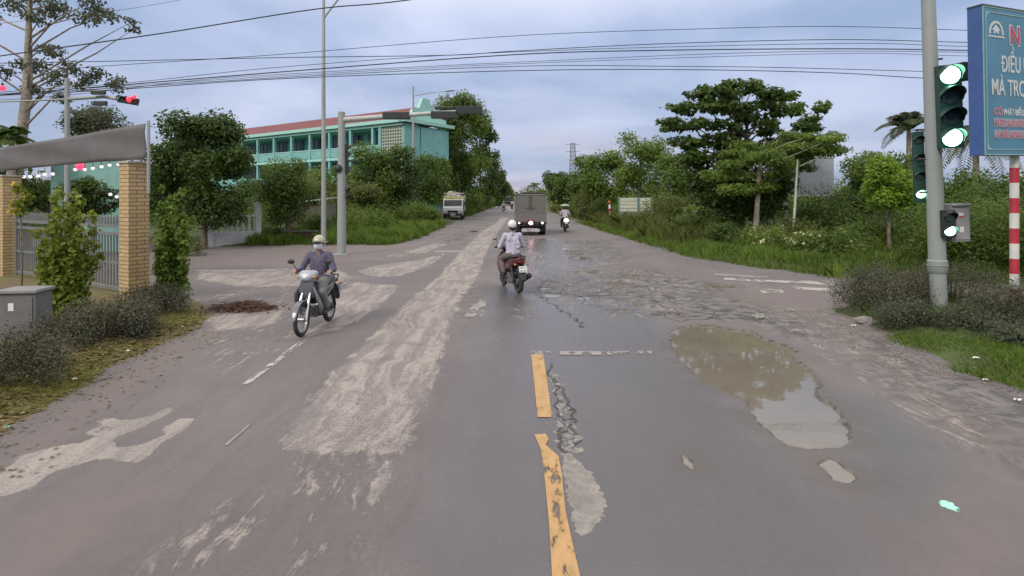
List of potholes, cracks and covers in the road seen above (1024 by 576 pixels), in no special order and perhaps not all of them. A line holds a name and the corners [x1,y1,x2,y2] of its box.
crack [537,277,774,329]
crack [546,363,585,454]
pothole [669,324,855,450]
